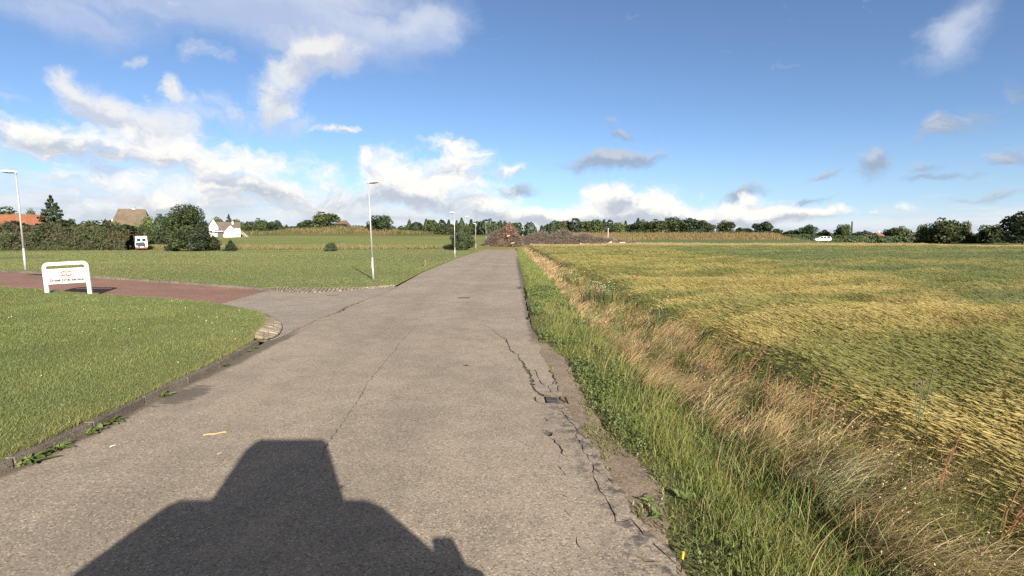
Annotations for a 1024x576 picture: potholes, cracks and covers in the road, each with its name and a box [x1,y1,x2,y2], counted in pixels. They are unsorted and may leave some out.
crack [485,325,644,536]
crack [632,554,663,563]
crack [283,292,424,462]
